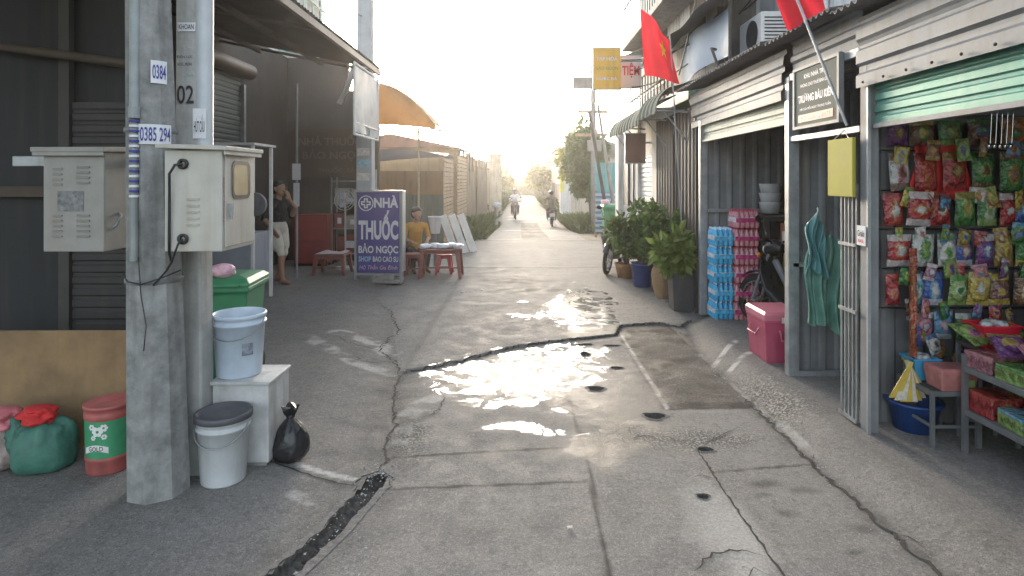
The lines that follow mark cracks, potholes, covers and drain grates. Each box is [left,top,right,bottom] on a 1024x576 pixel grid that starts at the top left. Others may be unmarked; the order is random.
crack [694,397,942,576]
crack [258,307,692,576]
pothole [640,412,669,420]
